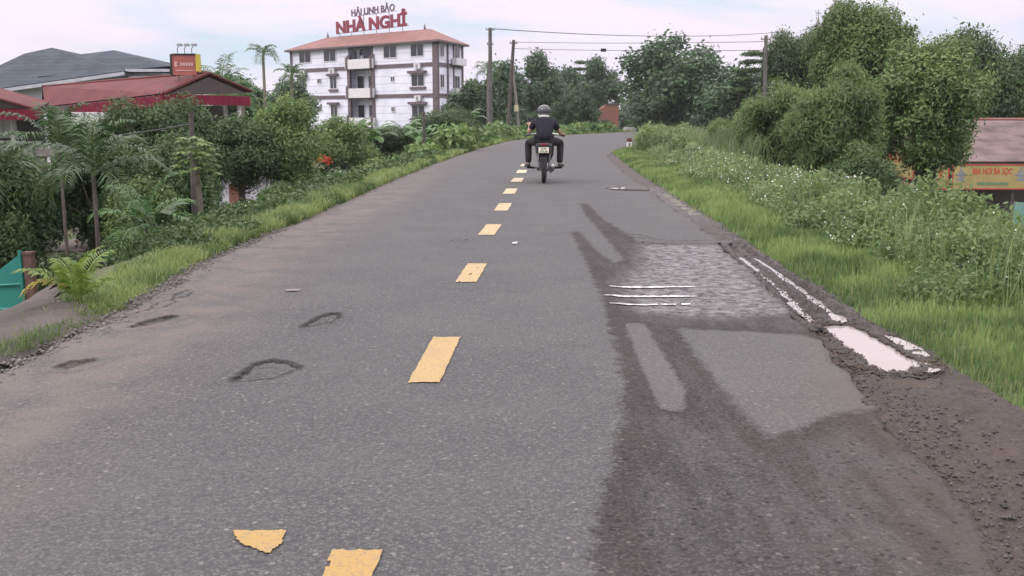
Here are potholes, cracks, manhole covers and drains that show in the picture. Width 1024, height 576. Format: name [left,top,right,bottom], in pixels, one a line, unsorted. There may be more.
pothole [111,313,192,332]
pothole [33,355,116,374]
pothole [288,311,353,331]
pothole [210,355,318,386]
pothole [800,318,947,379]
